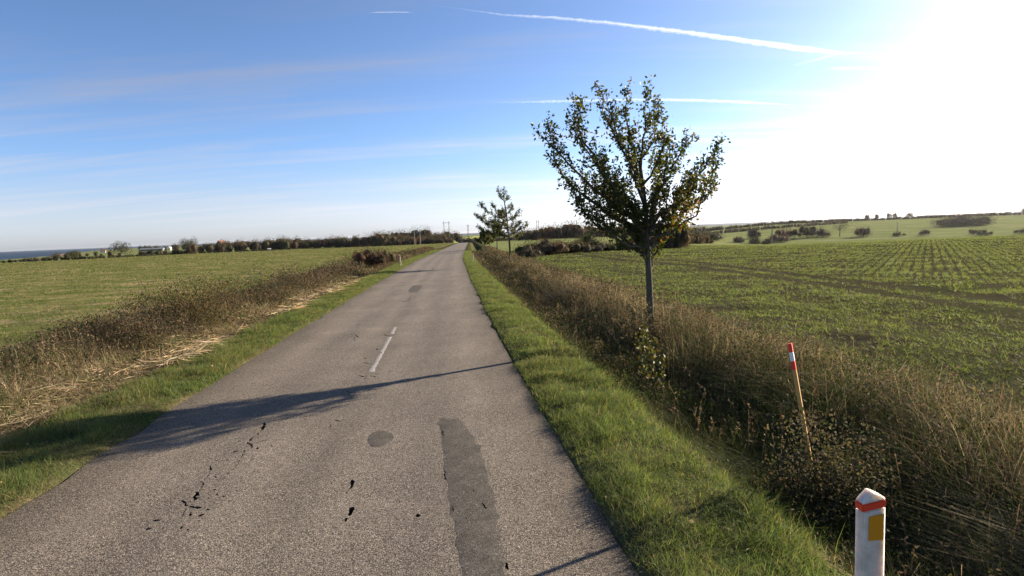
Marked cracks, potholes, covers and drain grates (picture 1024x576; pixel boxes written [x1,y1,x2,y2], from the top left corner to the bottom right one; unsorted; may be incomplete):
crack [145,423,272,531]
